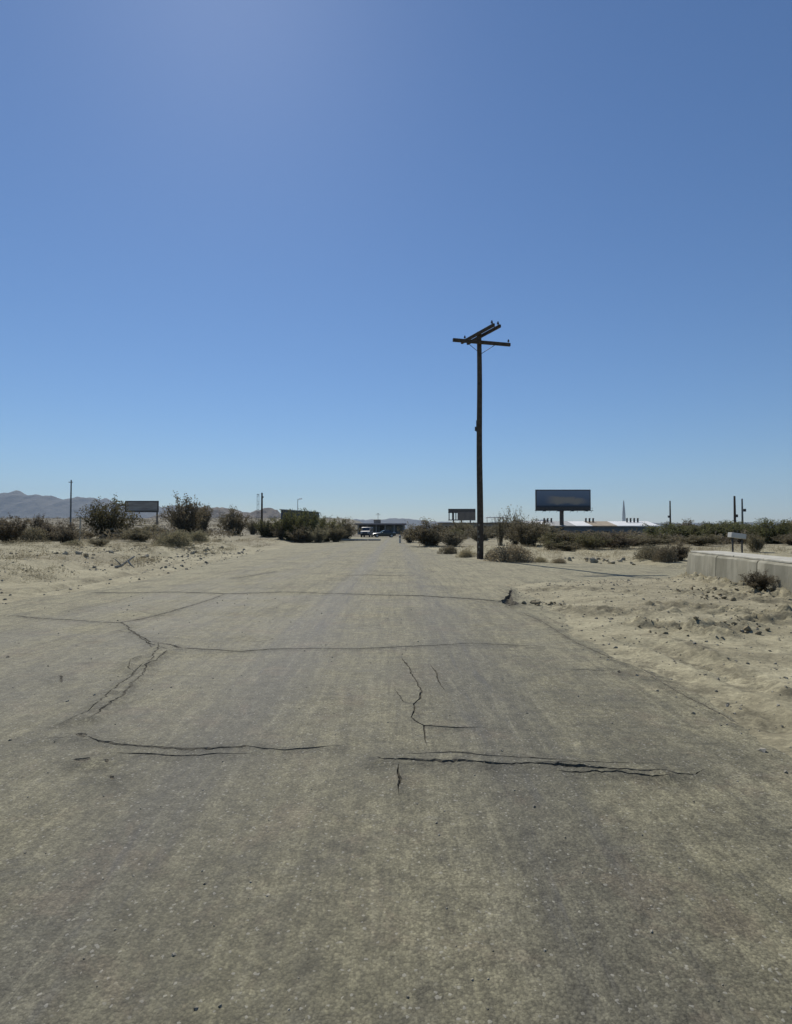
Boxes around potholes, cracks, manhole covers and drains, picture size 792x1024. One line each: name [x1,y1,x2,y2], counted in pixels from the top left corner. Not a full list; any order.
crack [374,659,702,794]
crack [45,736,334,756]
crack [21,572,501,720]
